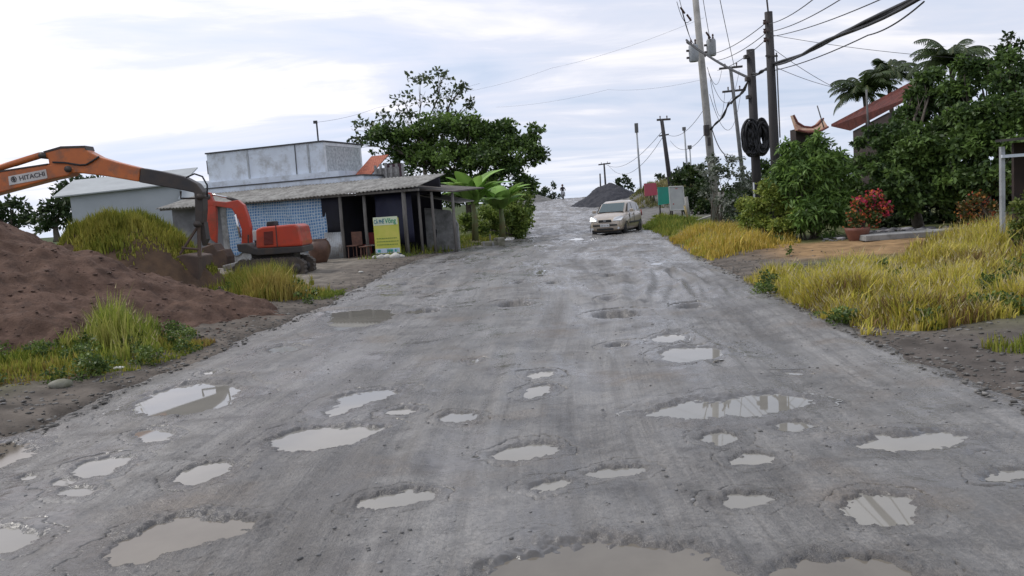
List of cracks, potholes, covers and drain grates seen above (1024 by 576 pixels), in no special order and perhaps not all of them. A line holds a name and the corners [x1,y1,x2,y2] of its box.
pothole [565,457,666,485]
pothole [711,446,793,473]
pothole [155,456,251,491]
pothole [820,423,1017,463]
pothole [282,304,437,338]
pothole [600,384,852,433]
pothole [427,408,491,428]
pothole [417,518,800,576]
pothole [817,483,955,535]
pothole [332,483,454,518]
pothole [576,307,657,321]
pothole [241,418,413,458]
